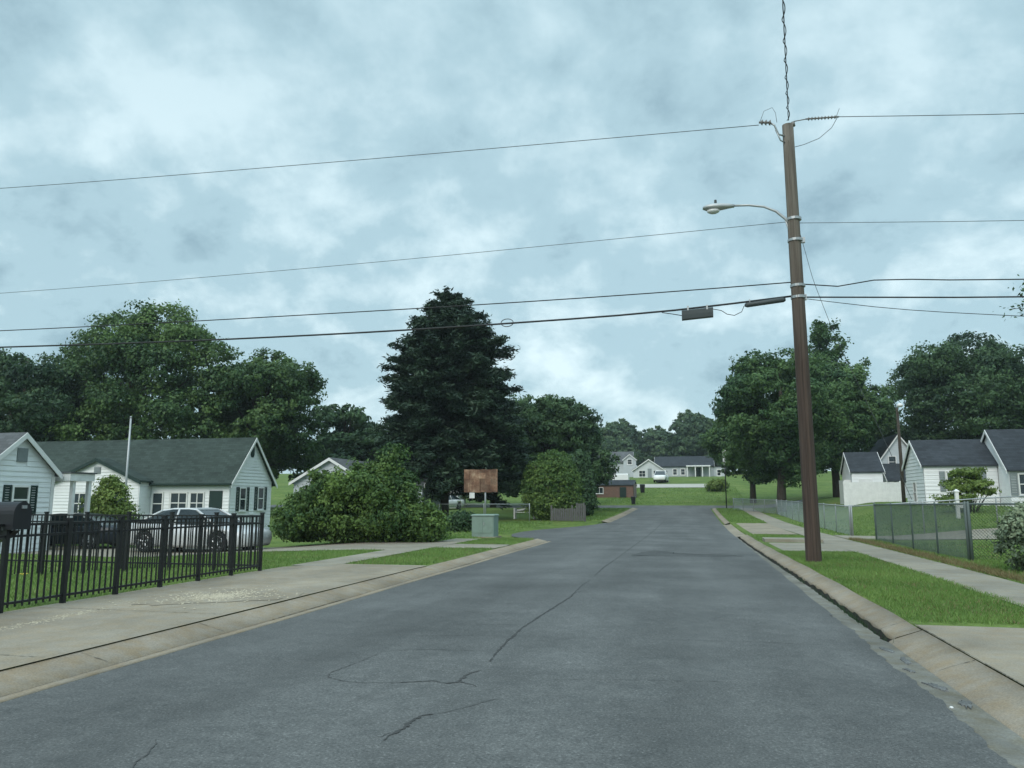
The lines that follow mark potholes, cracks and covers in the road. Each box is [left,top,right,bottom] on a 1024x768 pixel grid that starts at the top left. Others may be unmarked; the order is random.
crack [327,583,585,740]
